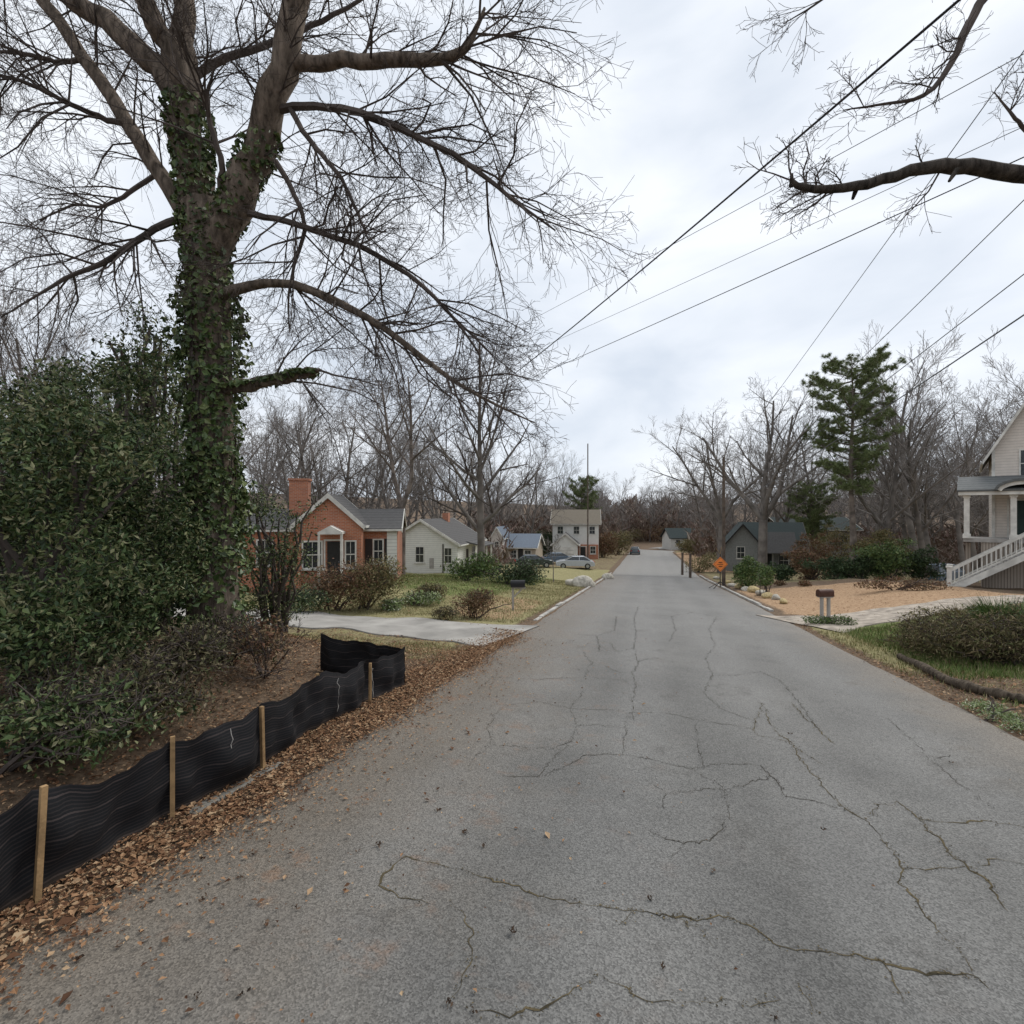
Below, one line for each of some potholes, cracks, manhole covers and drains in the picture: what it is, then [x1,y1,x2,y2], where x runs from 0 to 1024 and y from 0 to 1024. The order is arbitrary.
crack [479,622,616,689]
crack [447,900,821,1019]
crack [469,691,760,787]
crack [652,612,1024,970]
crack [378,855,986,1001]
